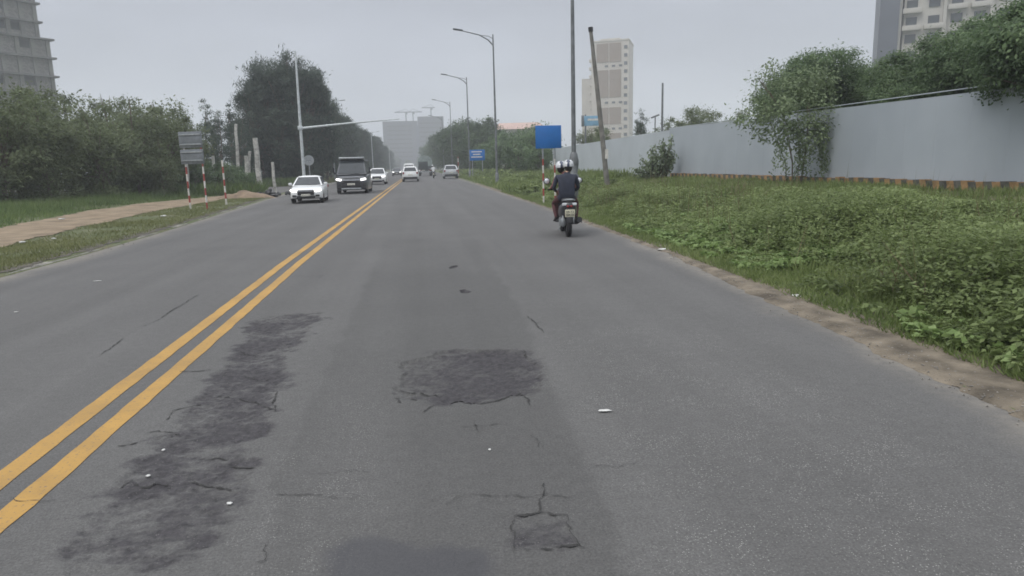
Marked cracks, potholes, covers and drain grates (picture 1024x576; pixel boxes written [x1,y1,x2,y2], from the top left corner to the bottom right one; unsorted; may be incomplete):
crack [448,483,595,566]
